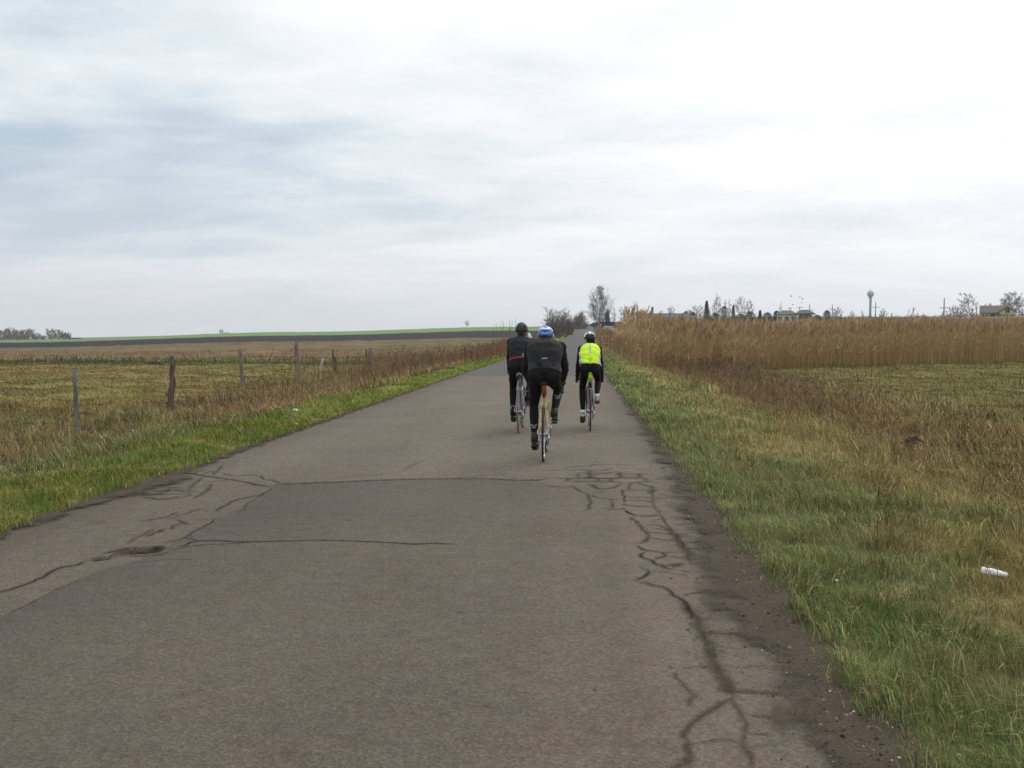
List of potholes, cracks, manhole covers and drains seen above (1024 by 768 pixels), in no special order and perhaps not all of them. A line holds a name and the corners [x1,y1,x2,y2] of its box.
crack [552,464,781,768]
crack [3,563,81,591]
crack [106,466,444,561]
